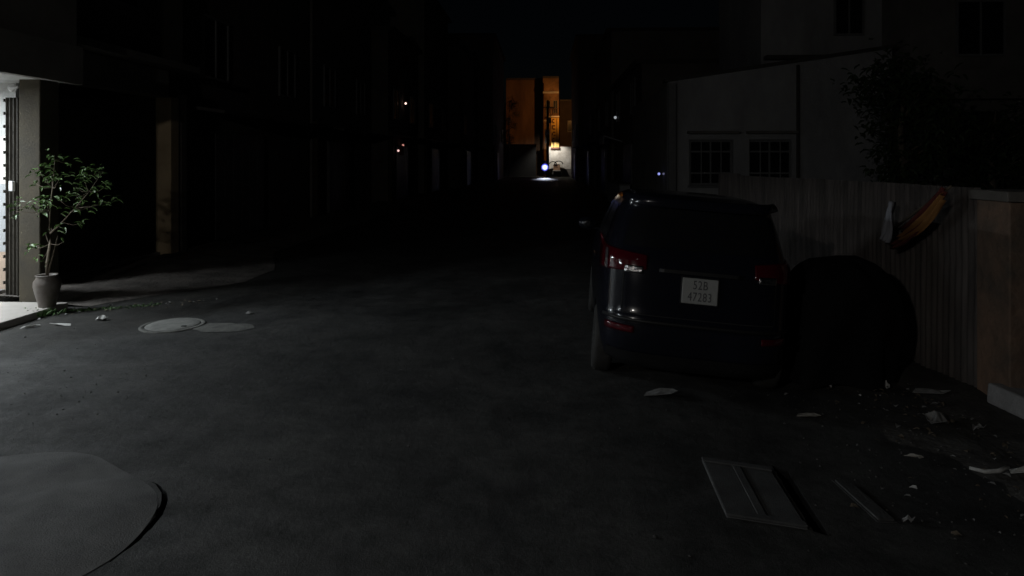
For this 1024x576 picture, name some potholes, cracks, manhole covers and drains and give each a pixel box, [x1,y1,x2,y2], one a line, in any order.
manhole cover [138,318,206,333]
